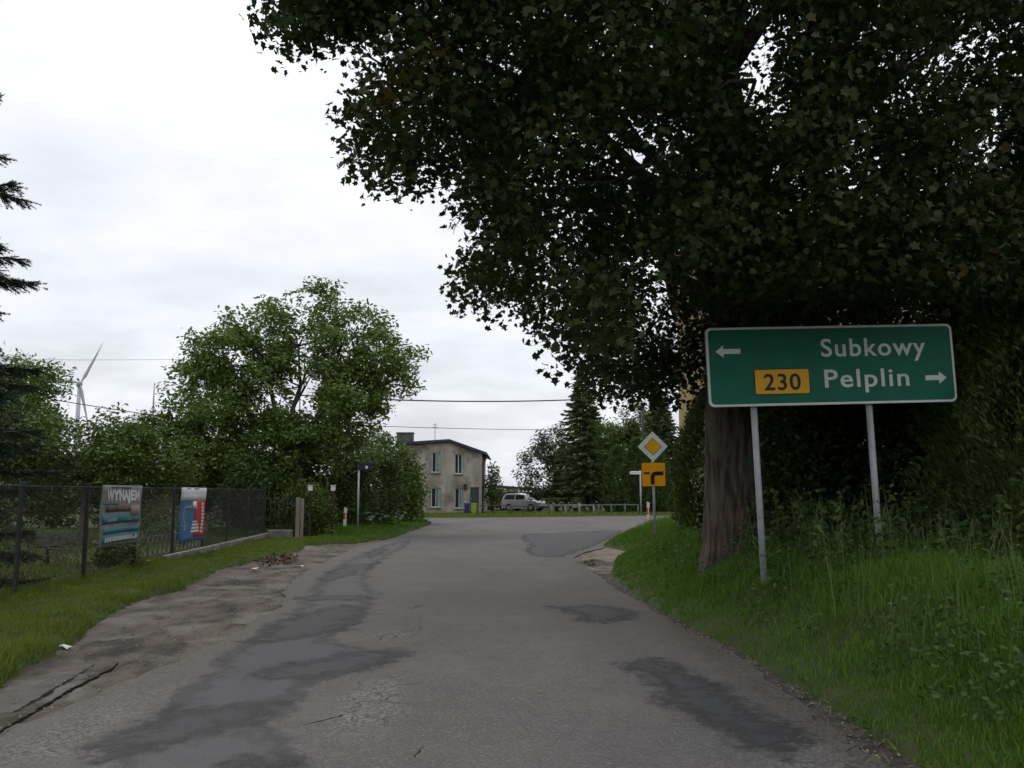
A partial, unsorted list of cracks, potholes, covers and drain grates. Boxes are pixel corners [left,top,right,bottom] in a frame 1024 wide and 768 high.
crack [0,663,119,733]
crack [304,670,420,726]
